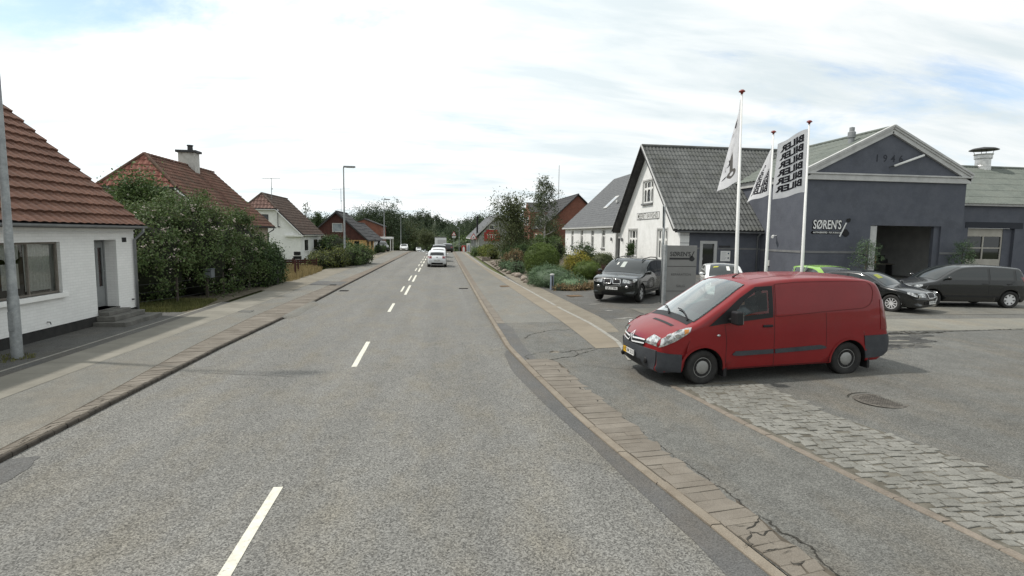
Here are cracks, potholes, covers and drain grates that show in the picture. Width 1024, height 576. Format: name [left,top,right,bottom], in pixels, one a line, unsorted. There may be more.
manhole cover [847,392,909,408]
